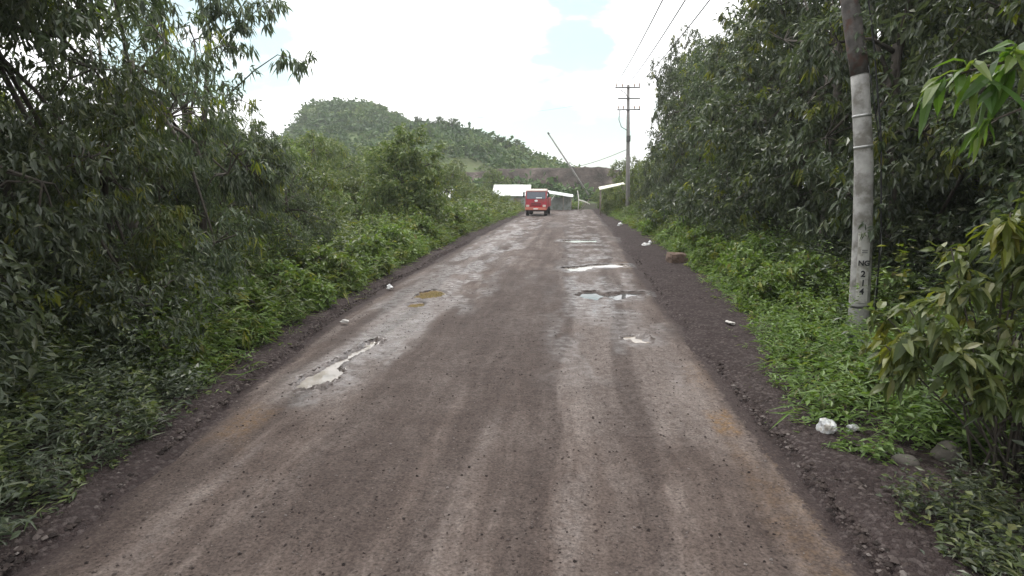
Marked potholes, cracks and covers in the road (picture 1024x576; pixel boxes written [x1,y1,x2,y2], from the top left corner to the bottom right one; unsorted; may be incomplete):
pothole [409,288,451,300]
pothole [401,300,430,309]
pothole [283,334,391,393]
pothole [570,289,651,301]
pothole [559,263,632,272]
pothole [618,333,655,344]
